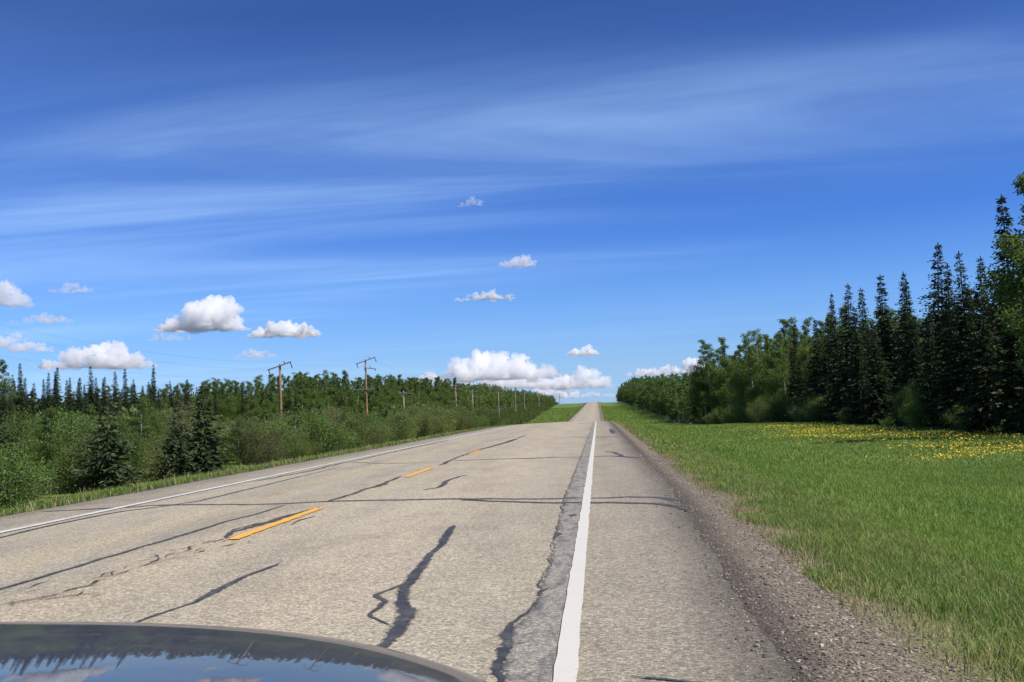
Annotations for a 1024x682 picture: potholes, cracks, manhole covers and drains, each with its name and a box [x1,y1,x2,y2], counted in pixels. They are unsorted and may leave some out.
crack [3,507,319,605]
